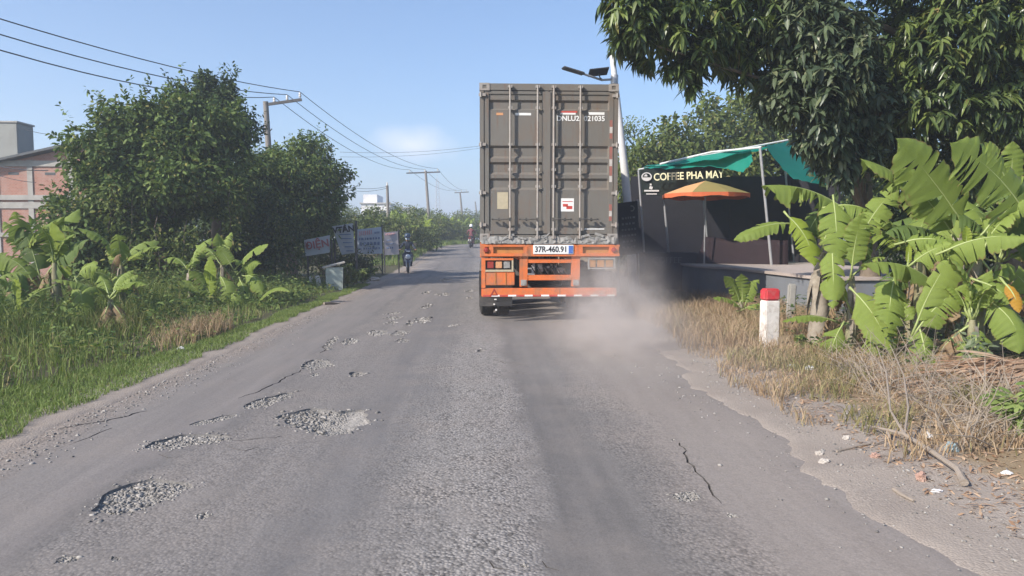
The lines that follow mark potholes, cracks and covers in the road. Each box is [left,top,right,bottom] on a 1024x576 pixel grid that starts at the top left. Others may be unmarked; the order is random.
pothole [190,414,241,426]
pothole [80,474,205,524]
crack [679,445,722,504]
pothole [300,359,335,373]
pothole [243,390,300,412]
pothole [132,431,245,452]
pothole [272,406,384,439]
